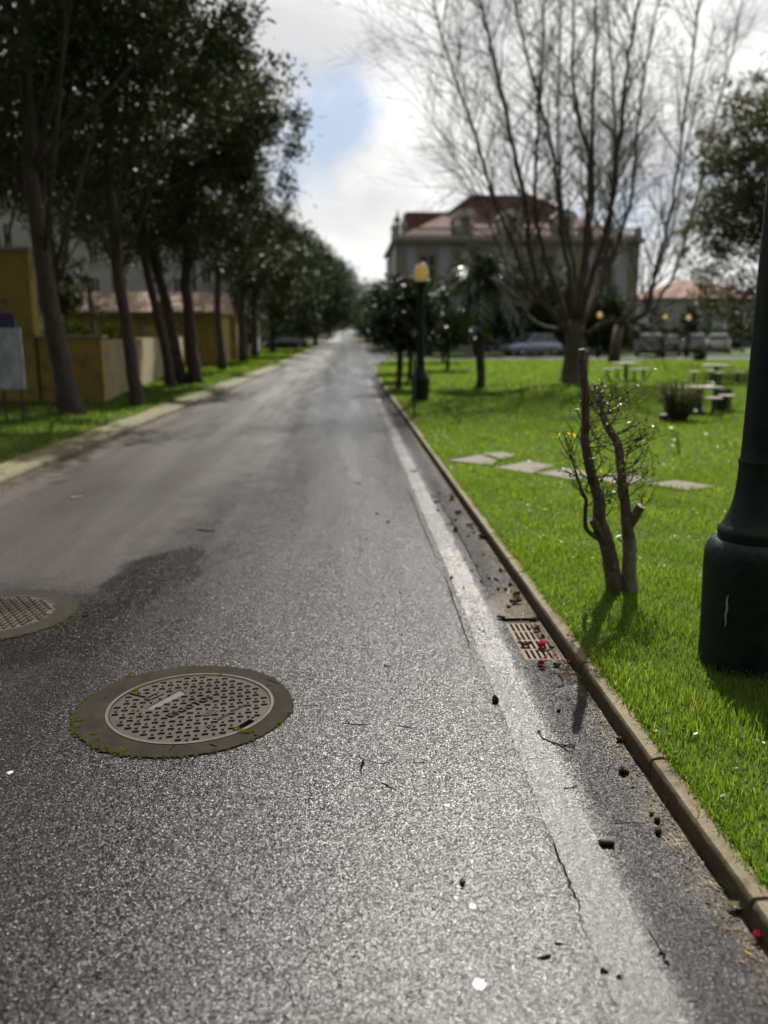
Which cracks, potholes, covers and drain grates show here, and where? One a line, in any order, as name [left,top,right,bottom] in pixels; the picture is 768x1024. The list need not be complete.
drain grate [502,618,566,660]
crack [646,926,671,973]
manhole cover [68,665,295,759]
manhole cover [0,588,81,640]
crack [542,822,588,939]
